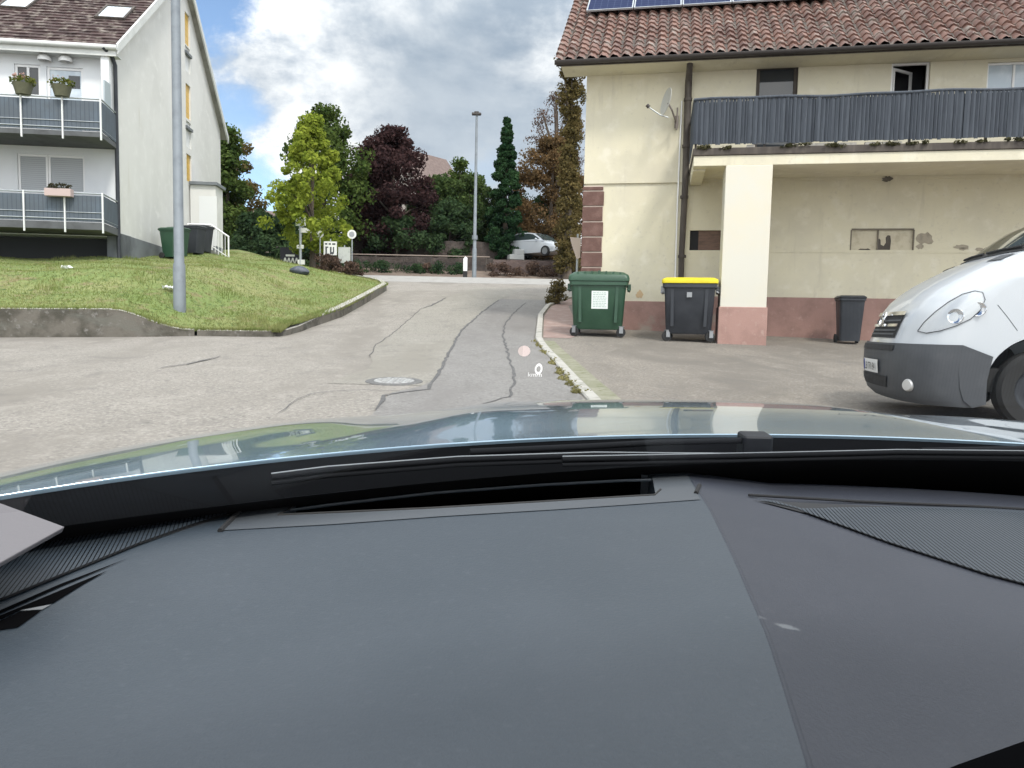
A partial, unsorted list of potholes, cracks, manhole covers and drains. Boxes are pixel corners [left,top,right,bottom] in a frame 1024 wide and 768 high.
crack [483,303,525,404]
manhole cover [365,377,423,386]
